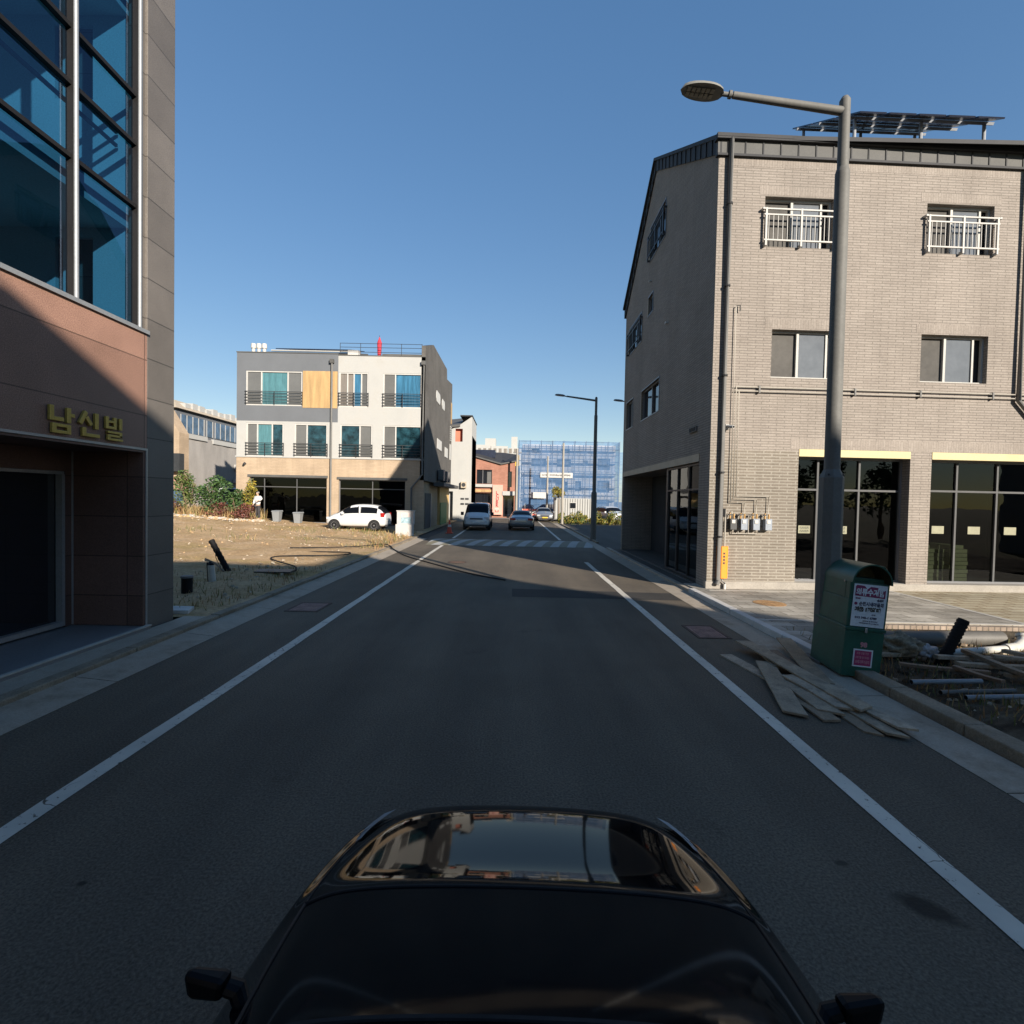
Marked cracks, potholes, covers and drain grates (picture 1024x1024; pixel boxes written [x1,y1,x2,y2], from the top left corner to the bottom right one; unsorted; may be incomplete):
manhole cover [285,602,332,612]
manhole cover [681,625,732,639]
